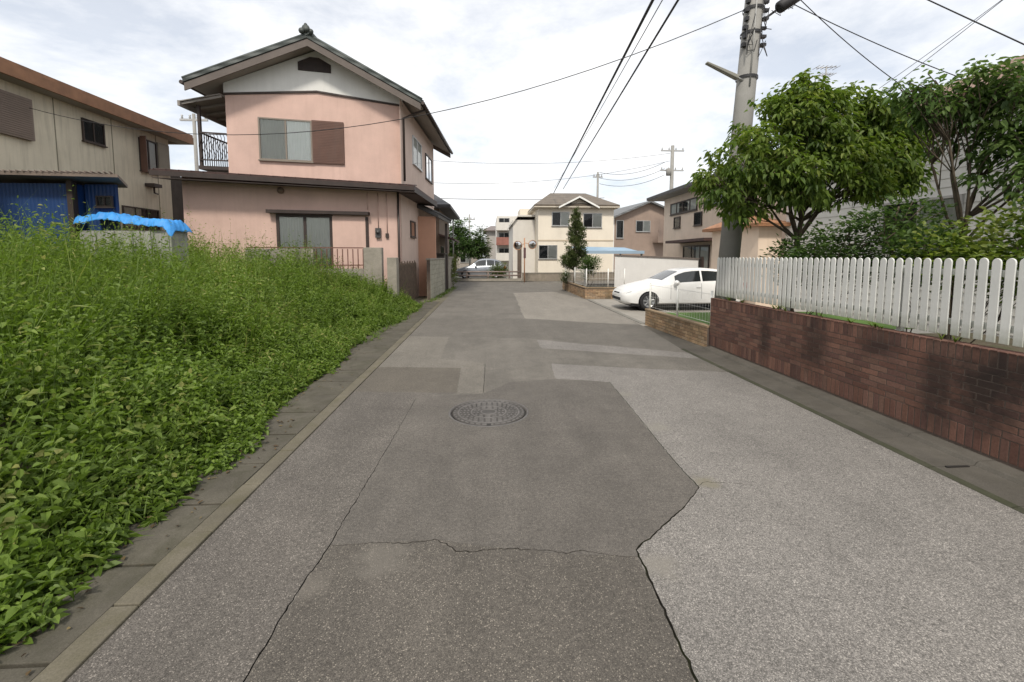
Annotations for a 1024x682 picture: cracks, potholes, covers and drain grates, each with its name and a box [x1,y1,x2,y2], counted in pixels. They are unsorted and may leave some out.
manhole cover [448,399,529,427]
crack [243,385,748,682]
